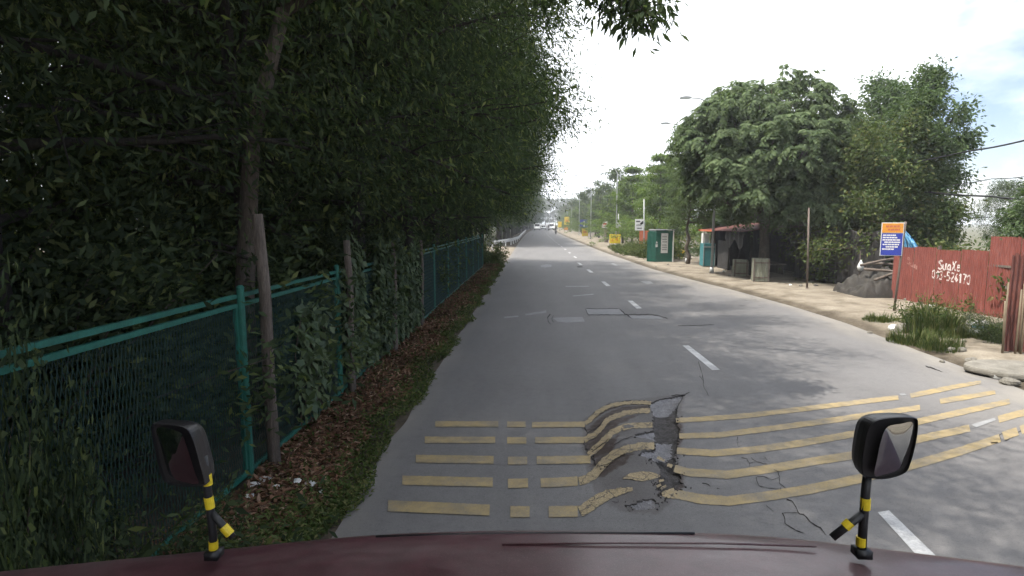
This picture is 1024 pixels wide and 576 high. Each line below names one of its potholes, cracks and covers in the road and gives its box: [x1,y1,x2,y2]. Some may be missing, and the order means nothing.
pothole [634,395,685,496]
crack [737,437,826,535]
pothole [625,498,660,510]
